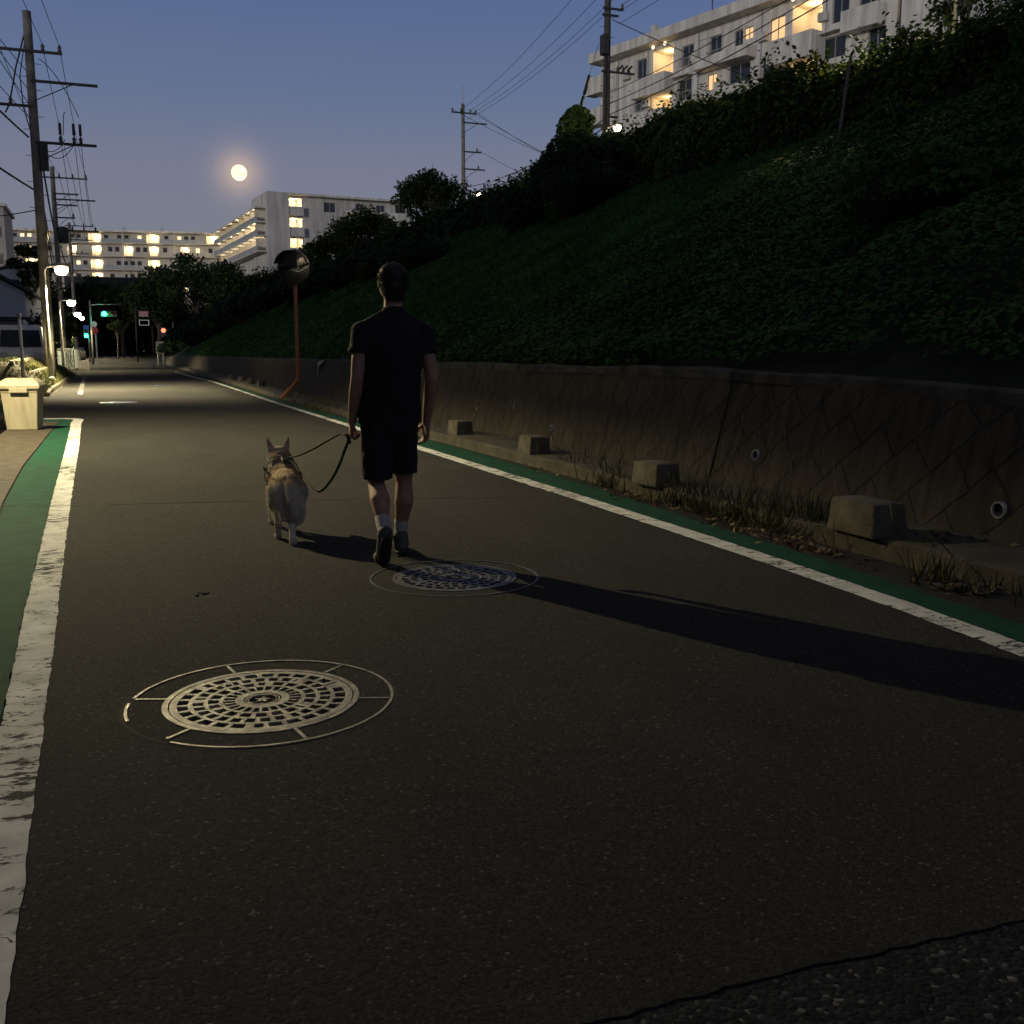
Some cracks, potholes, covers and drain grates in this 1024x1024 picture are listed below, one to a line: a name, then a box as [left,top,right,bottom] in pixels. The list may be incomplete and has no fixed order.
manhole cover [118,660,399,750]
manhole cover [367,560,541,597]
